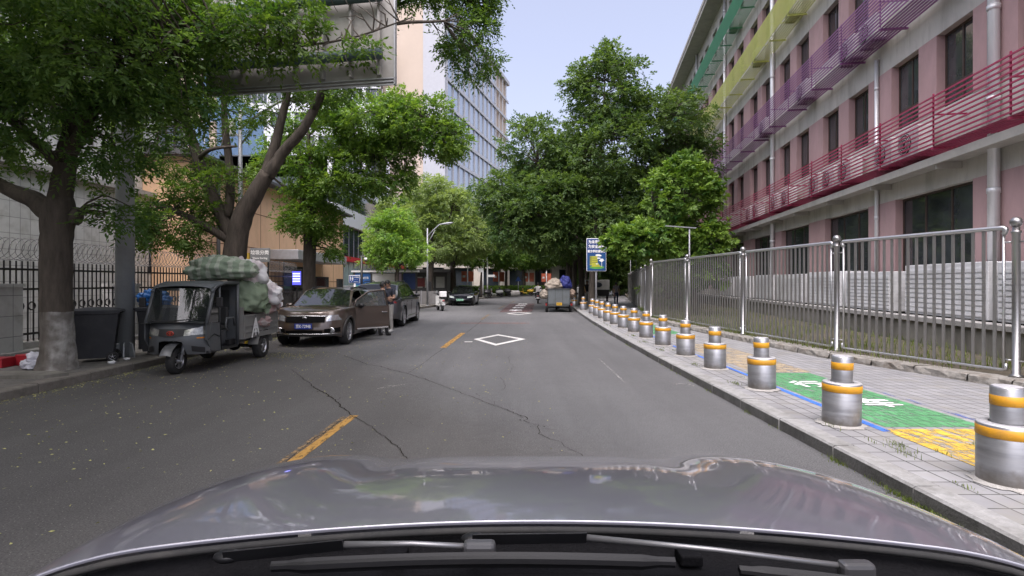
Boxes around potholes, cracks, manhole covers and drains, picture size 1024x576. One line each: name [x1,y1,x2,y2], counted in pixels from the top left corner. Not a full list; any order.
crack [286,355,407,462]
